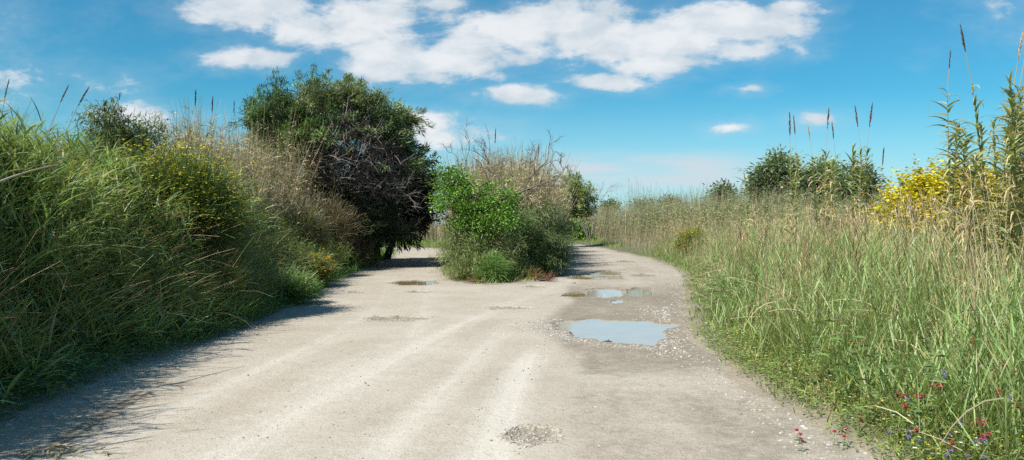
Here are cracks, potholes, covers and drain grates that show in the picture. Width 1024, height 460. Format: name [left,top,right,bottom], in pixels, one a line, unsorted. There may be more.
pothole [584,288,627,298]
pothole [502,425,563,446]
pothole [625,287,652,297]
pothole [547,318,684,348]
